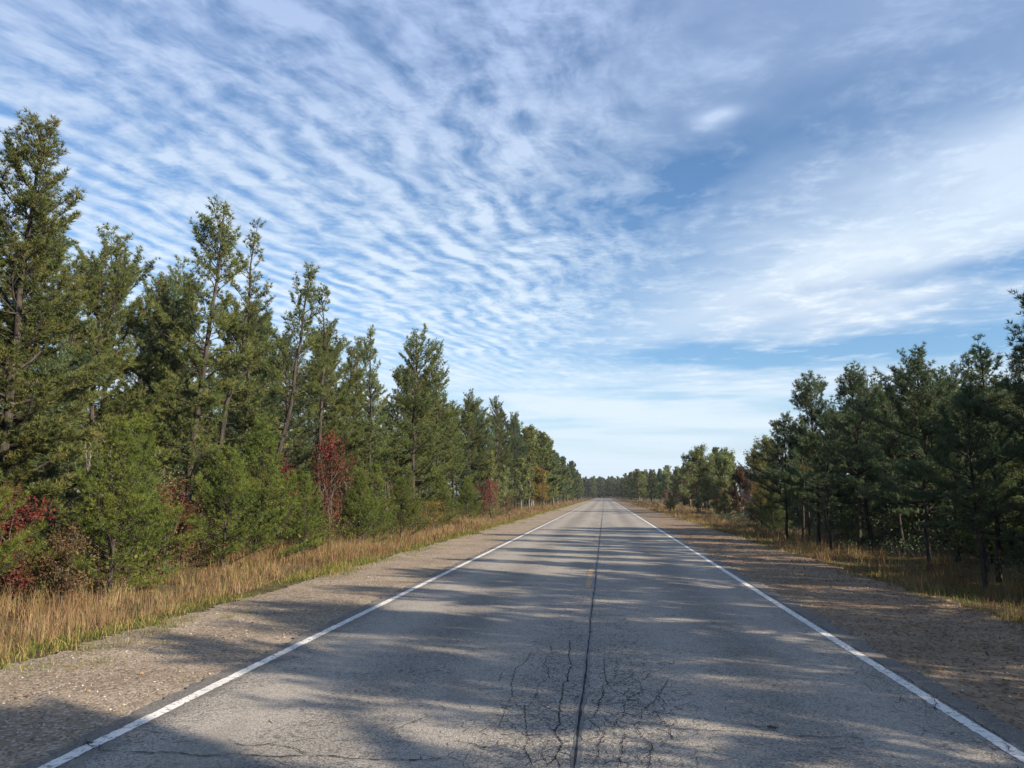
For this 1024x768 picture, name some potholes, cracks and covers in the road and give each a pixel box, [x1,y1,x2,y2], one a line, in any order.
crack [29,581,1019,768]
